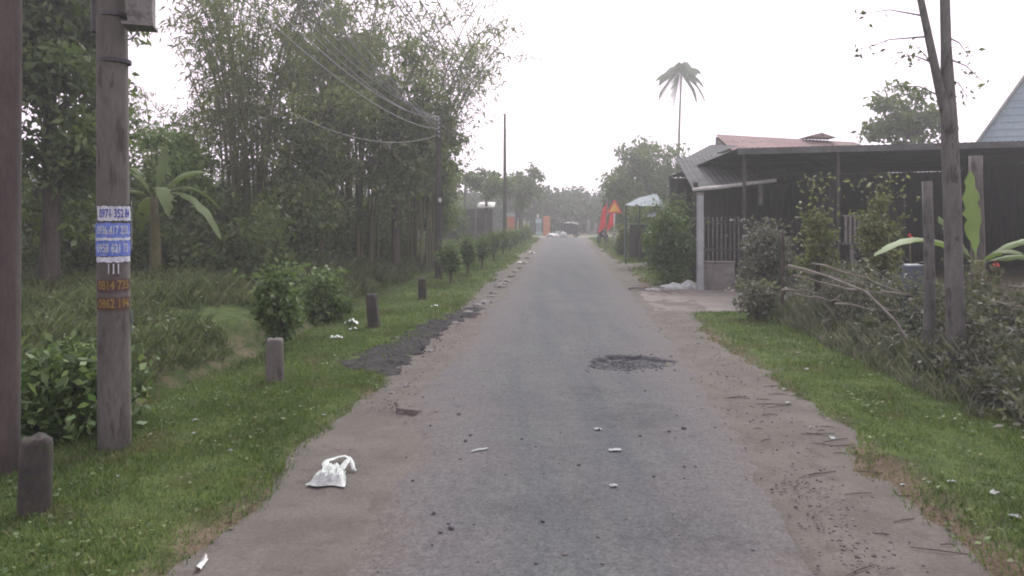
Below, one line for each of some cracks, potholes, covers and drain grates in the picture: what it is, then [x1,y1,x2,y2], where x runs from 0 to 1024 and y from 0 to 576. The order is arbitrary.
pothole [580,352,678,374]
